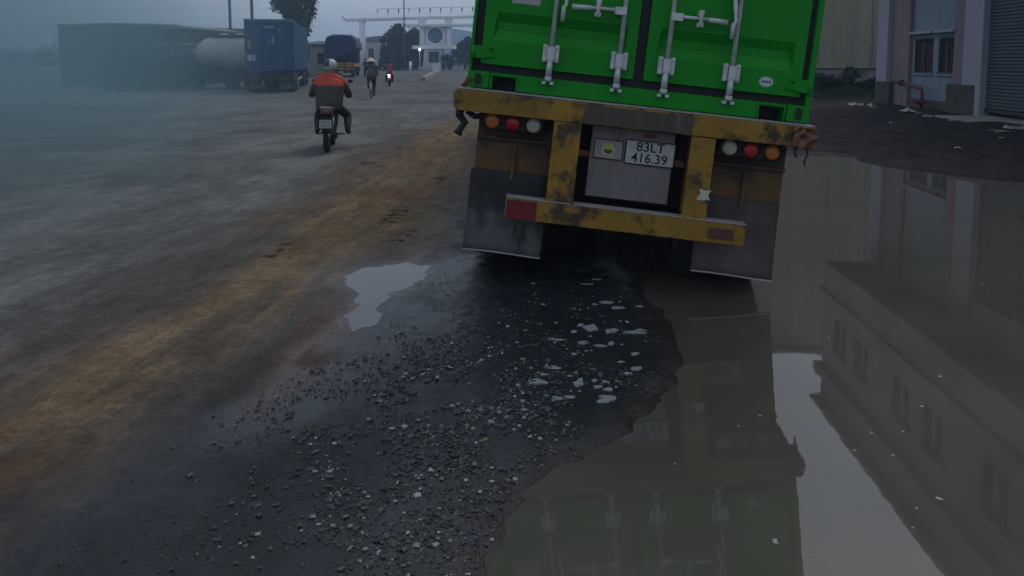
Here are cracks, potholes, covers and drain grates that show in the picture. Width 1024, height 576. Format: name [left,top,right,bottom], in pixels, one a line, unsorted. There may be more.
pothole [467,149,1024,576]
pothole [336,260,438,333]
